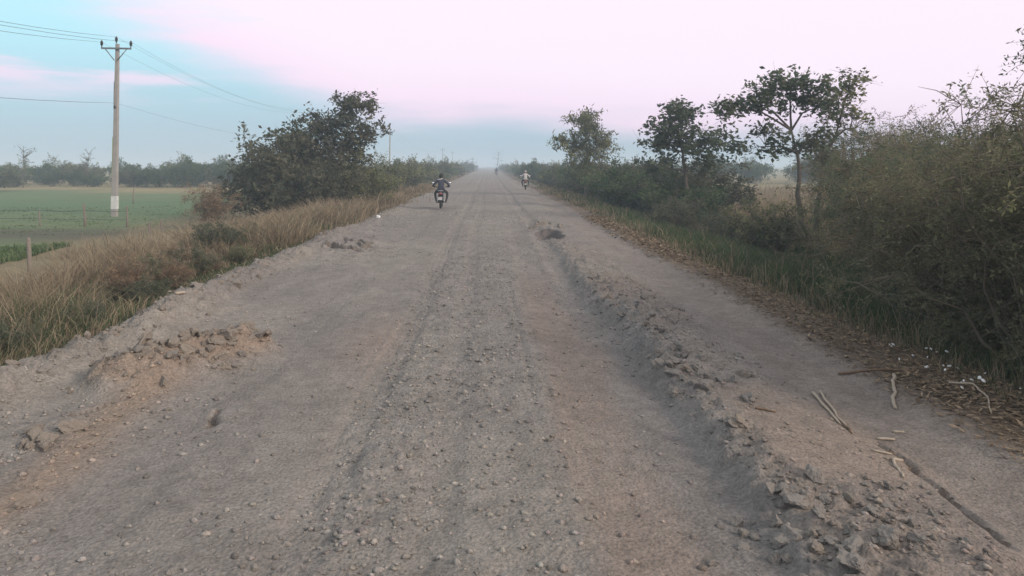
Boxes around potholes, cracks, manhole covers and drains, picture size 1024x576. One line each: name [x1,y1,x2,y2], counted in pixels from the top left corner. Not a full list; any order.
crack [878,444,1012,548]
pothole [535,228,566,240]
